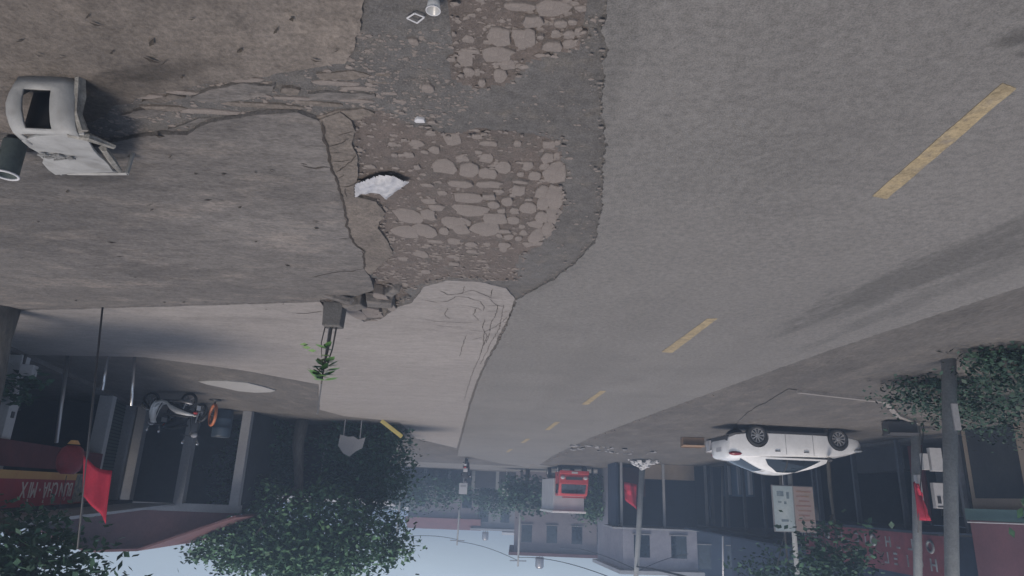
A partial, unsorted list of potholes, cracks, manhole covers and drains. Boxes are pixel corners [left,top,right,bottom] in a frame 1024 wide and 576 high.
crack [425,288,504,395]
pothole [353,107,574,290]
pothole [446,0,598,91]
crack [0,61,407,197]
